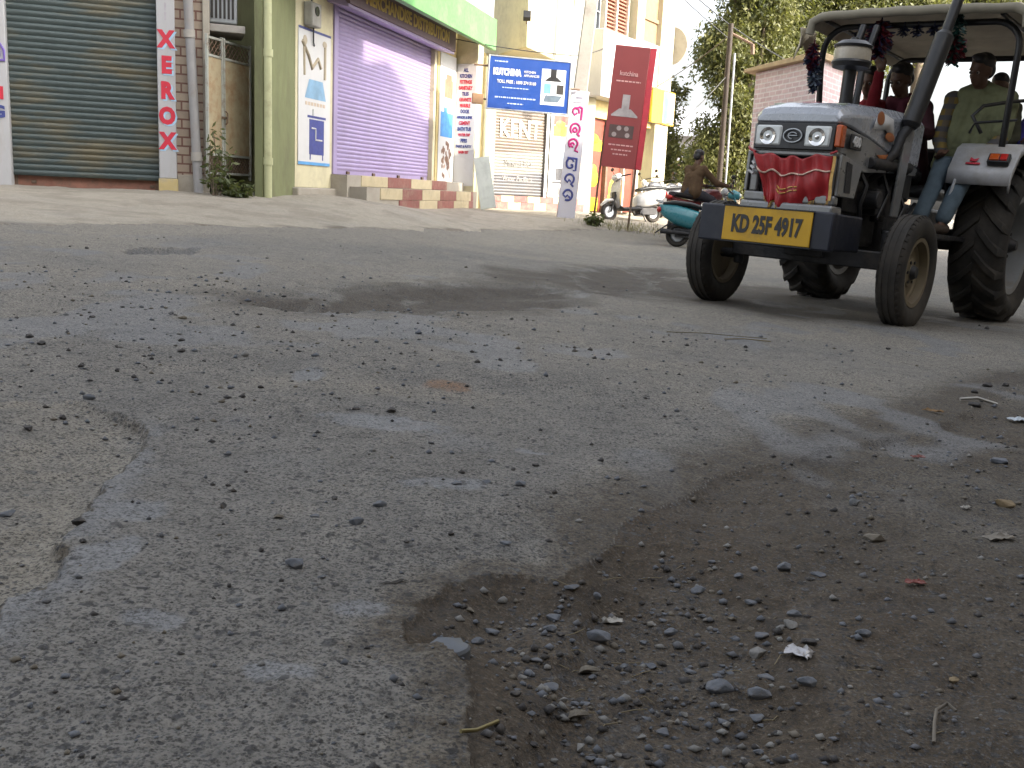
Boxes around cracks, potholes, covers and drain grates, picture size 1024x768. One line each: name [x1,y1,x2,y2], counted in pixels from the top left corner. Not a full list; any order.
pothole [402,542,850,768]
